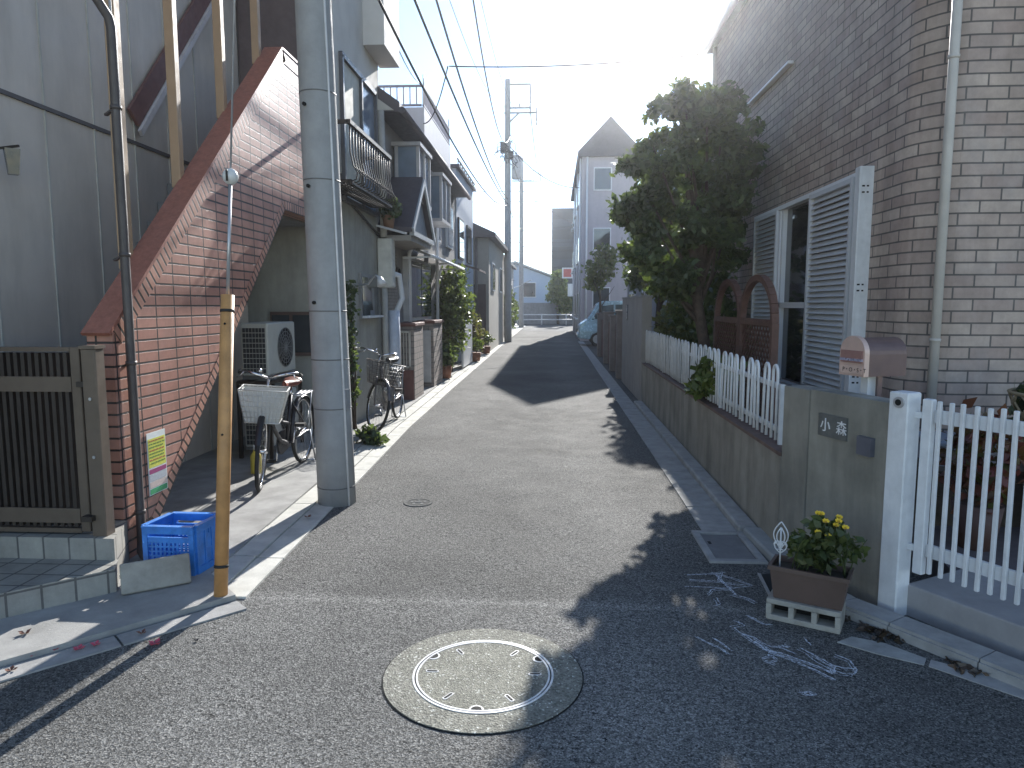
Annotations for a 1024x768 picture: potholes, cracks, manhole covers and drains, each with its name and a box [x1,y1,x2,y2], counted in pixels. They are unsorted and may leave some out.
manhole cover [381,629,584,735]
utility cover [404,498,433,507]
